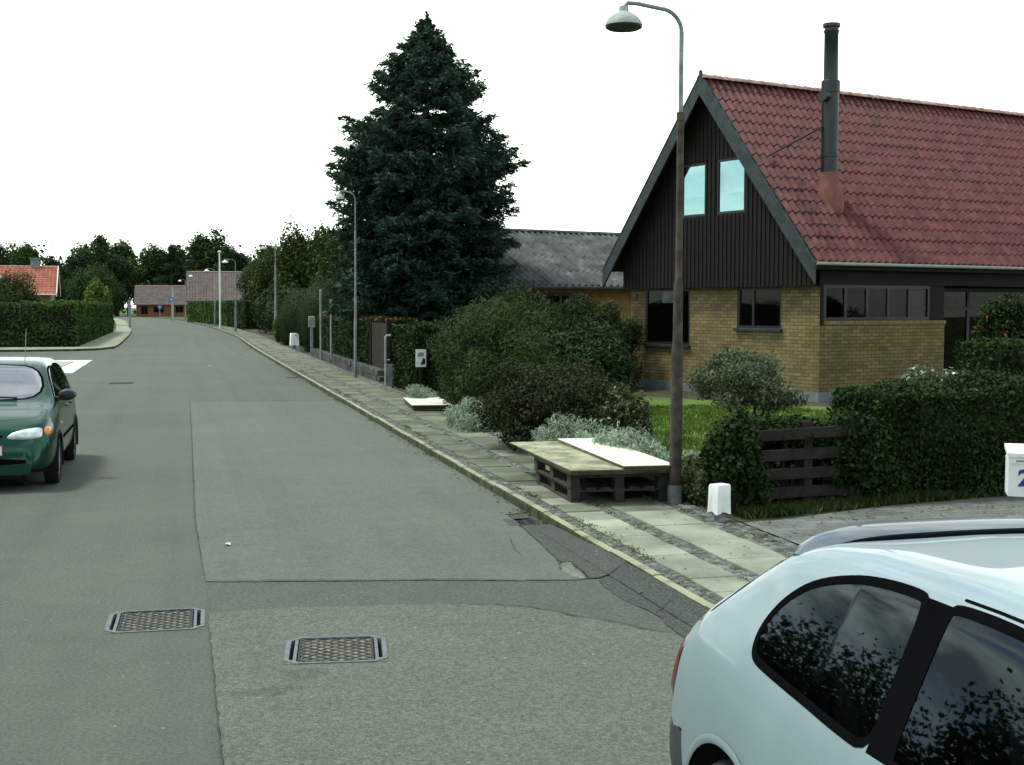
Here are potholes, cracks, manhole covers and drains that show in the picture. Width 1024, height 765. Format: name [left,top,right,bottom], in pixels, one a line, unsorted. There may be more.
drain grate [515,518,539,527]
